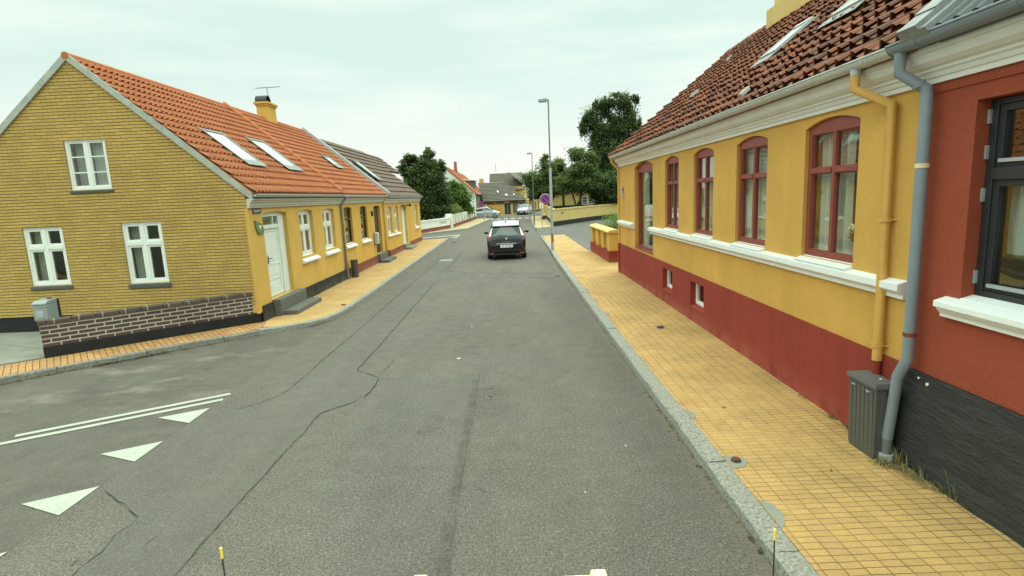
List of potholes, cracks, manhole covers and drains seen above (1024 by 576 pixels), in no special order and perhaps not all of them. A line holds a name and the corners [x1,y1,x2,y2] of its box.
crack [72,492,137,576]
crack [174,256,469,576]
